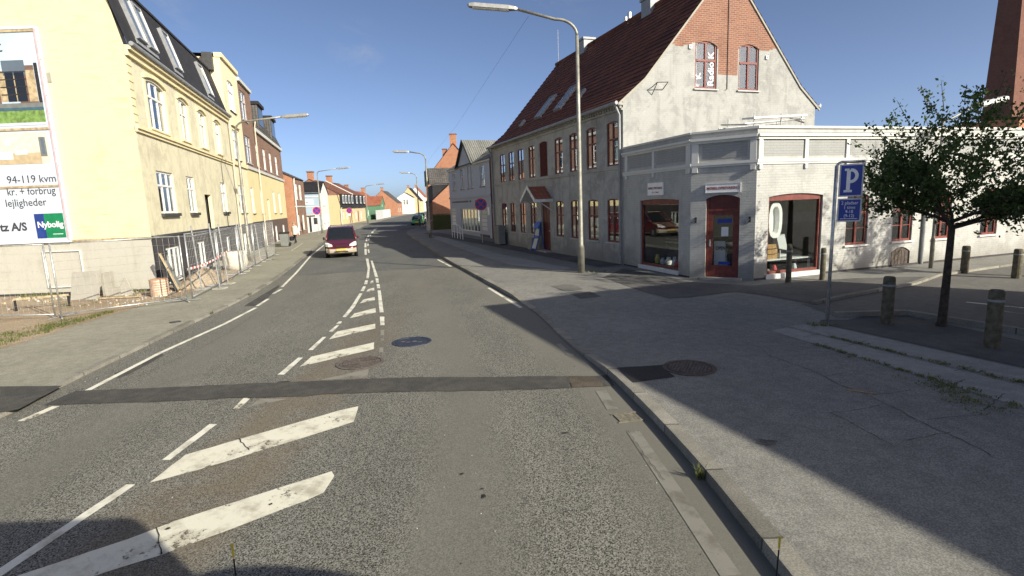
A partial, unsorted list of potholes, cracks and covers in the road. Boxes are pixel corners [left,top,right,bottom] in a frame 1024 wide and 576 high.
manhole cover [392,336,431,347]
manhole cover [336,356,384,370]
manhole cover [663,360,717,376]
